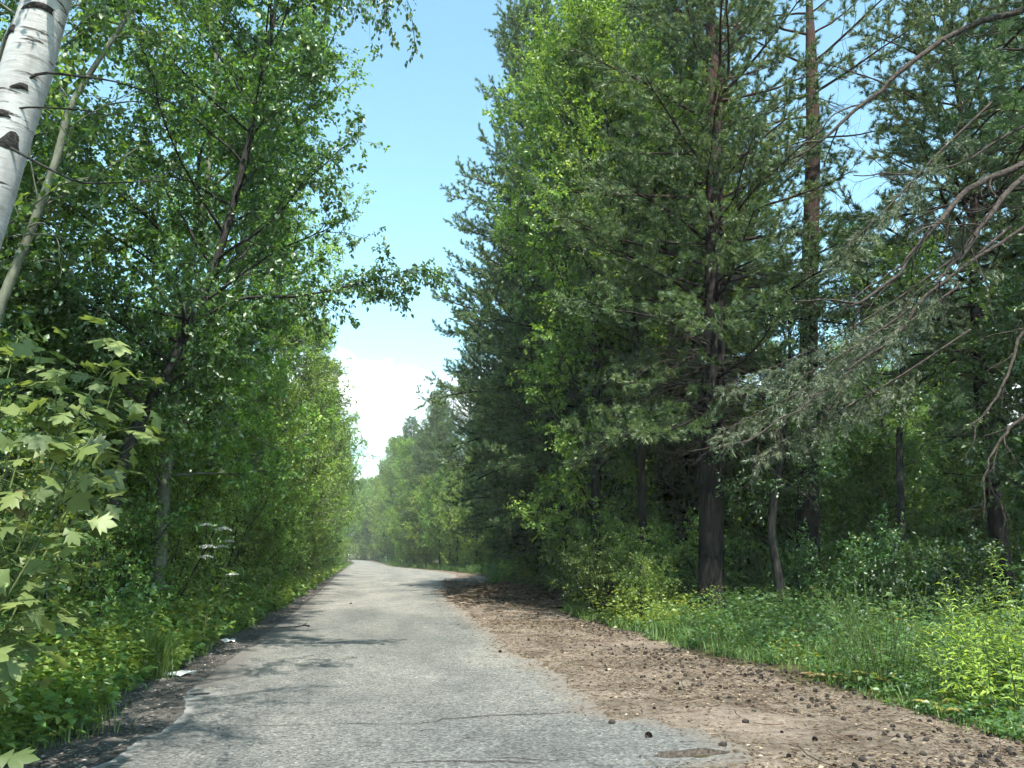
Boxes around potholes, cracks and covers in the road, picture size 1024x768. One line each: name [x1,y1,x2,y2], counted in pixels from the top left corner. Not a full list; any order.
pothole [653,748,730,758]
crack [252,712,571,731]
